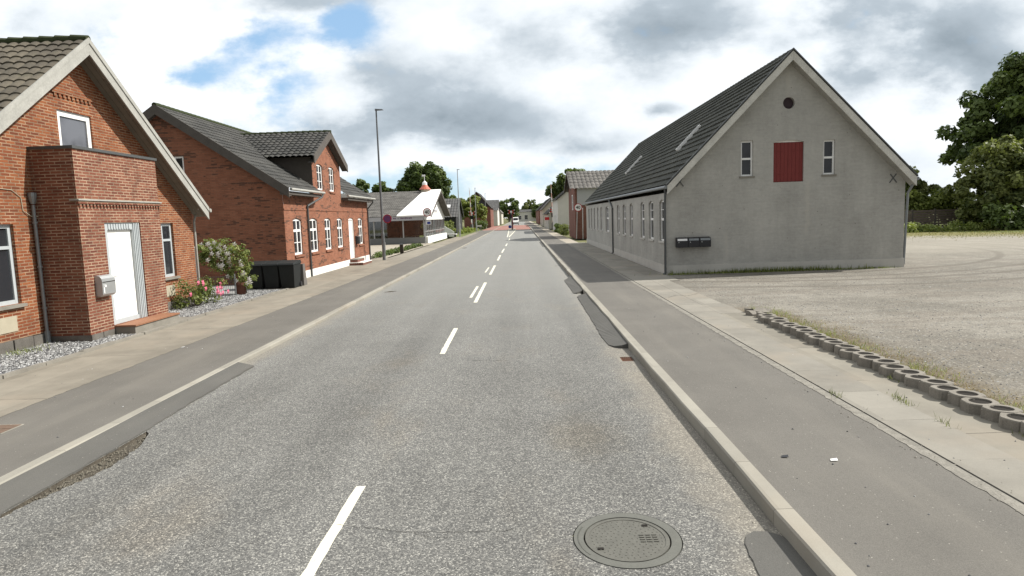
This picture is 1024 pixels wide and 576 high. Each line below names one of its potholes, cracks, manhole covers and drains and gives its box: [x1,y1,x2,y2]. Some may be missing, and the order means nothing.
manhole cover [573,513,683,569]
crack [336,524,510,537]
